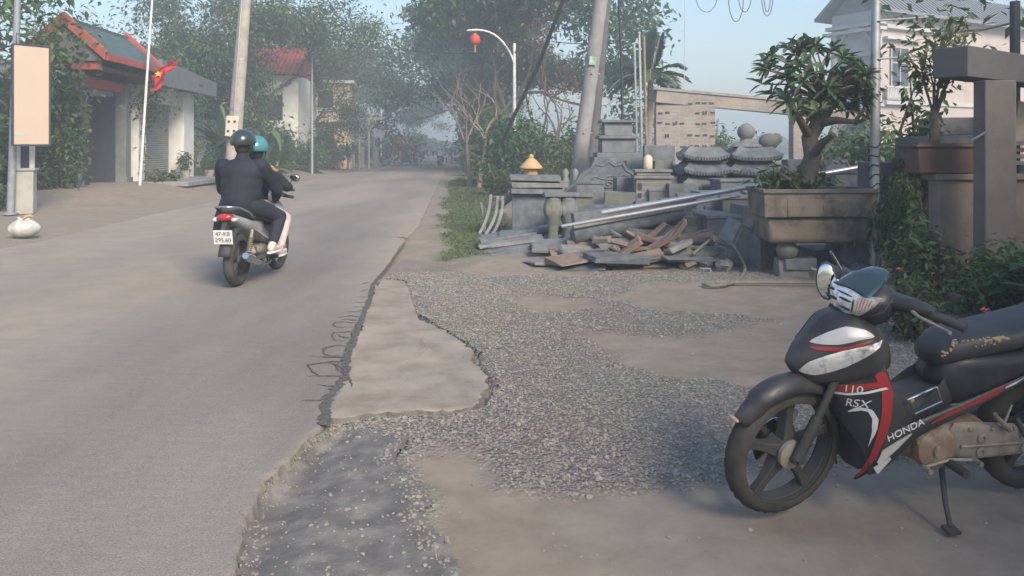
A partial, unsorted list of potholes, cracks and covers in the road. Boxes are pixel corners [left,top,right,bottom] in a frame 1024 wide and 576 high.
crack [307,237,409,425]
